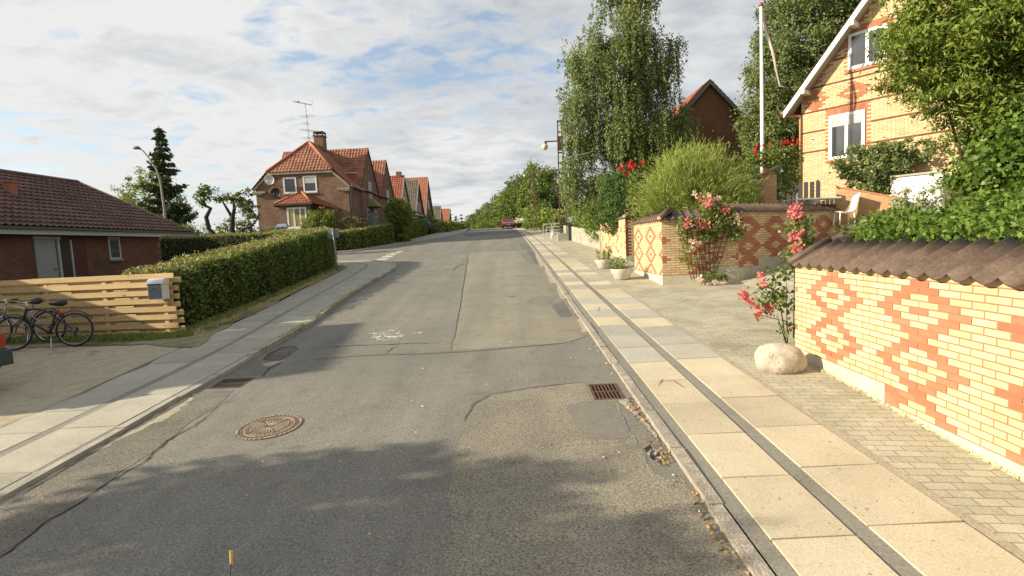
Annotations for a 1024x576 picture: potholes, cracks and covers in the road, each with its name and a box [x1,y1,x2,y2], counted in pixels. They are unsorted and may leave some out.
pothole [644,444,667,465]
drain grate [207,377,255,389]
manhole cover [235,414,303,441]
drain grate [588,383,625,400]
